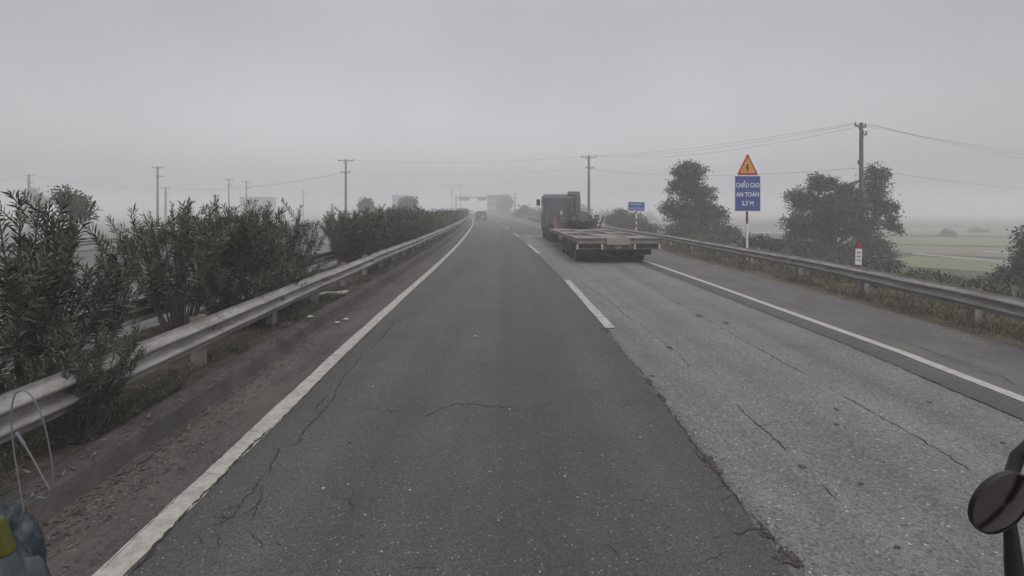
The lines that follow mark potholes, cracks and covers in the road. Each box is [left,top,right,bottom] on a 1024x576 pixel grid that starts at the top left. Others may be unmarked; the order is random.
crack [106,309,414,573]
crack [736,404,791,453]
